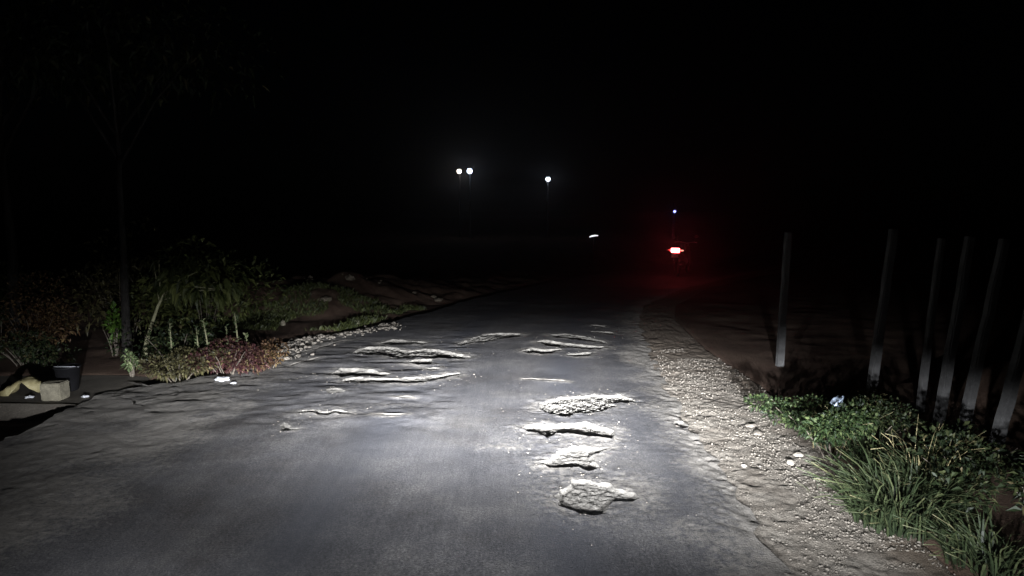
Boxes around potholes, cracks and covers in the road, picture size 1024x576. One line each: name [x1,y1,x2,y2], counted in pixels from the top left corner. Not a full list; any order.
pothole [524,422,615,438]
pothole [331,368,392,378]
pothole [554,479,640,516]
pothole [353,347,471,359]
pothole [457,333,522,345]
pothole [539,445,608,471]
pothole [340,372,460,383]
pothole [539,395,636,417]
pothole [550,333,607,344]
pothole [537,340,611,349]
